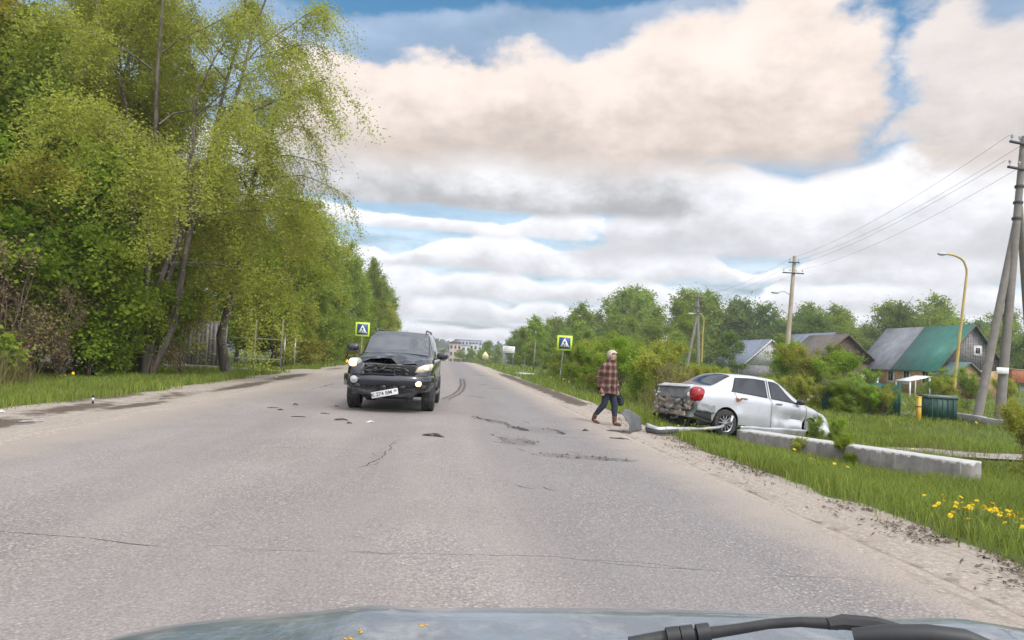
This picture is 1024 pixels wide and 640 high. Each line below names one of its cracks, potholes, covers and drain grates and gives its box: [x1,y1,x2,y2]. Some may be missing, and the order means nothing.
pothole [532,452,637,462]
pothole [496,436,539,446]
